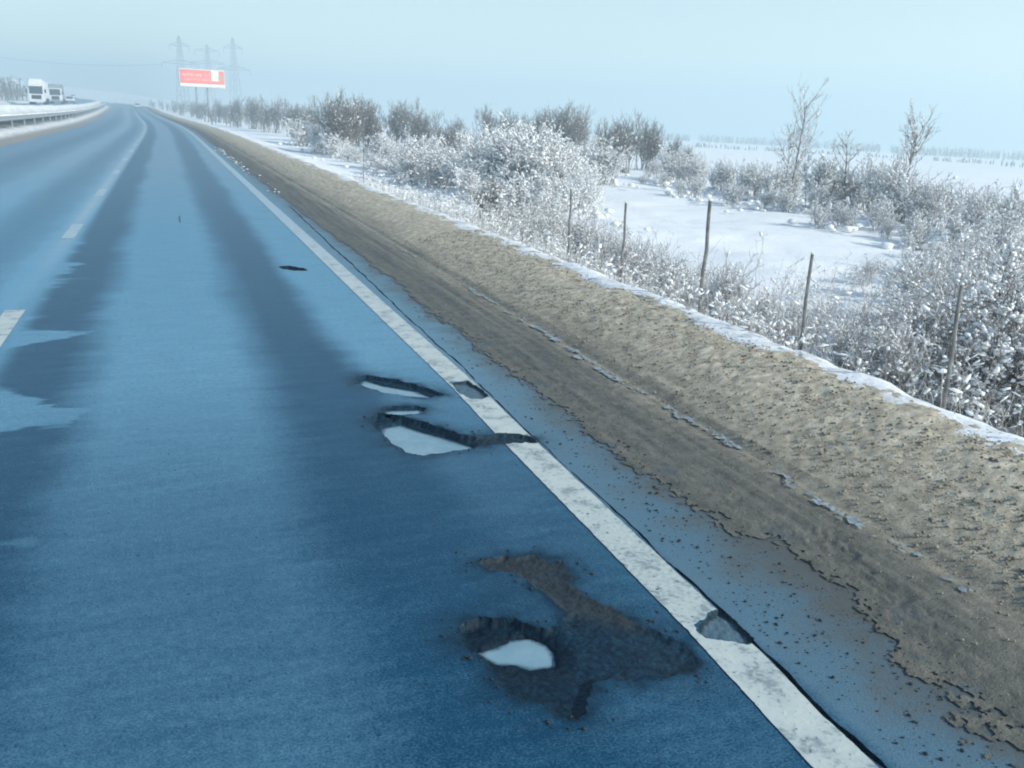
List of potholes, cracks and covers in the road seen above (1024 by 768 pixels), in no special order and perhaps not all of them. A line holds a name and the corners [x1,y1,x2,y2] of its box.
pothole [380,405,427,418]
pothole [456,554,702,720]
pothole [452,381,488,399]
pothole [370,413,537,448]
pothole [698,610,754,645]
pothole [355,375,444,397]
